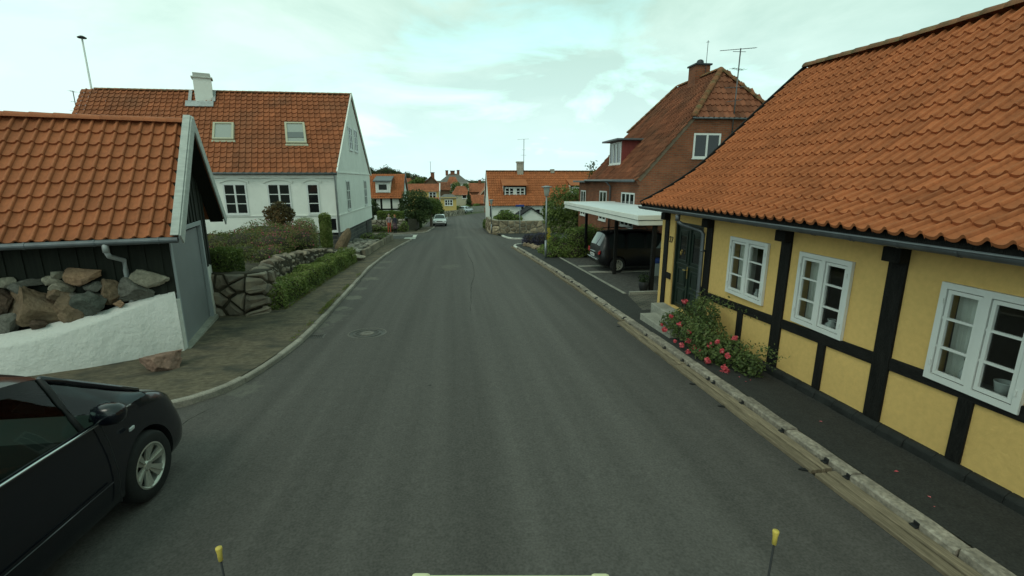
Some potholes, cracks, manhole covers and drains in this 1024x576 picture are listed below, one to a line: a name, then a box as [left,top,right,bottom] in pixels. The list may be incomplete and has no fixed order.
manhole cover [348,328,387,339]
